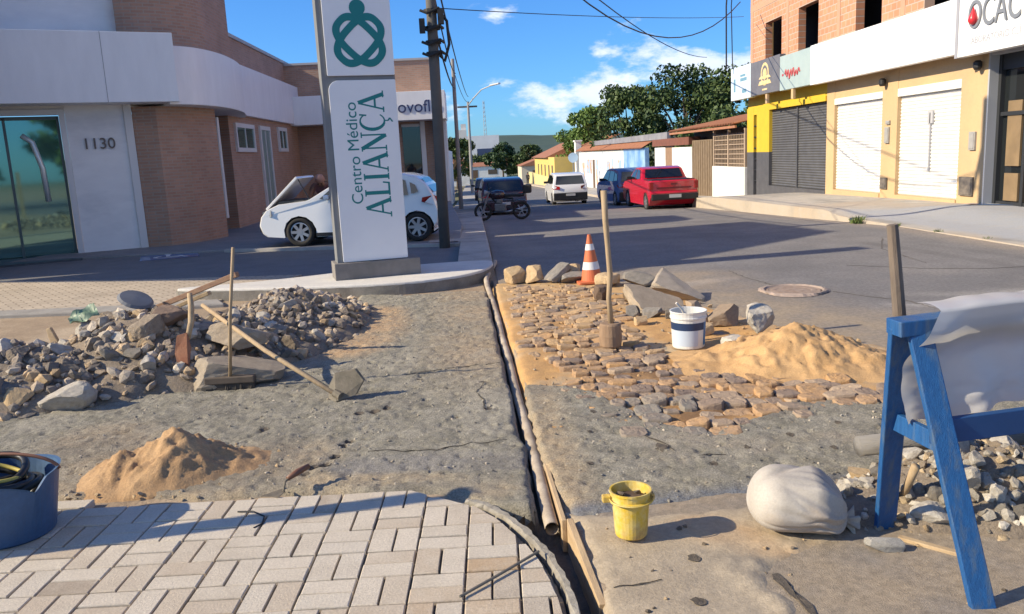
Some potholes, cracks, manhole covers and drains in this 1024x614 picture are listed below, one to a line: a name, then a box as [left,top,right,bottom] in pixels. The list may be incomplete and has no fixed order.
crack [405,362,500,410]
crack [368,439,507,452]
manhole cover [758,284,830,297]
